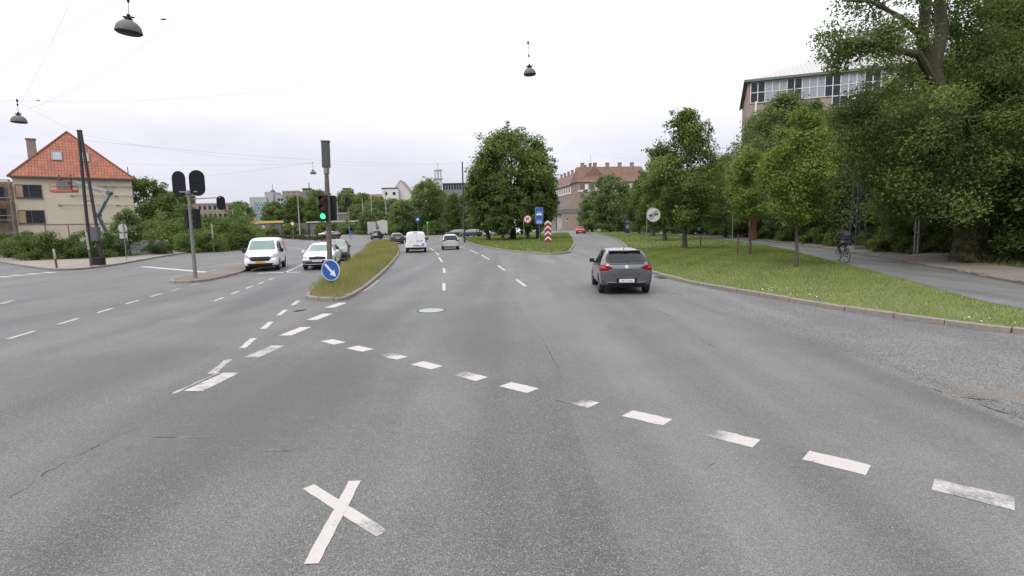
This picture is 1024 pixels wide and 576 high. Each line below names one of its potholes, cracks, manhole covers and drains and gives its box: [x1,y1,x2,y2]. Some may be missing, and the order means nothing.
crack [5,420,188,501]
crack [923,386,1024,419]
